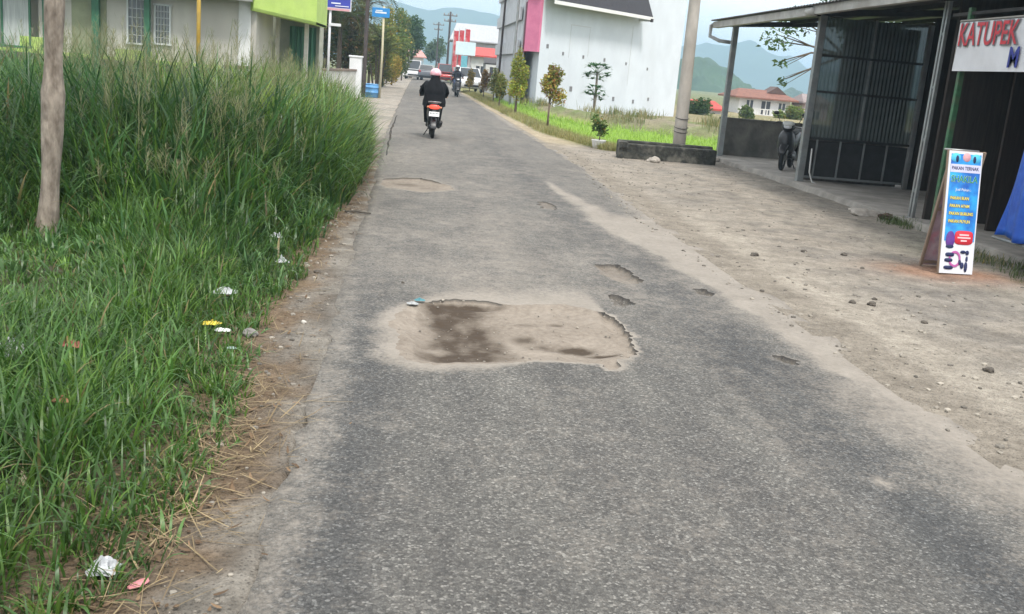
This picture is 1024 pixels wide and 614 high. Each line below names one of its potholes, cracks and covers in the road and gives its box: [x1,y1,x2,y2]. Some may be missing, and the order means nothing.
pothole [380,178,454,192]
pothole [608,294,636,308]
crack [386,116,397,155]
pothole [594,264,644,284]
pothole [772,355,799,365]
pothole [388,299,639,370]
pothole [536,201,557,210]
